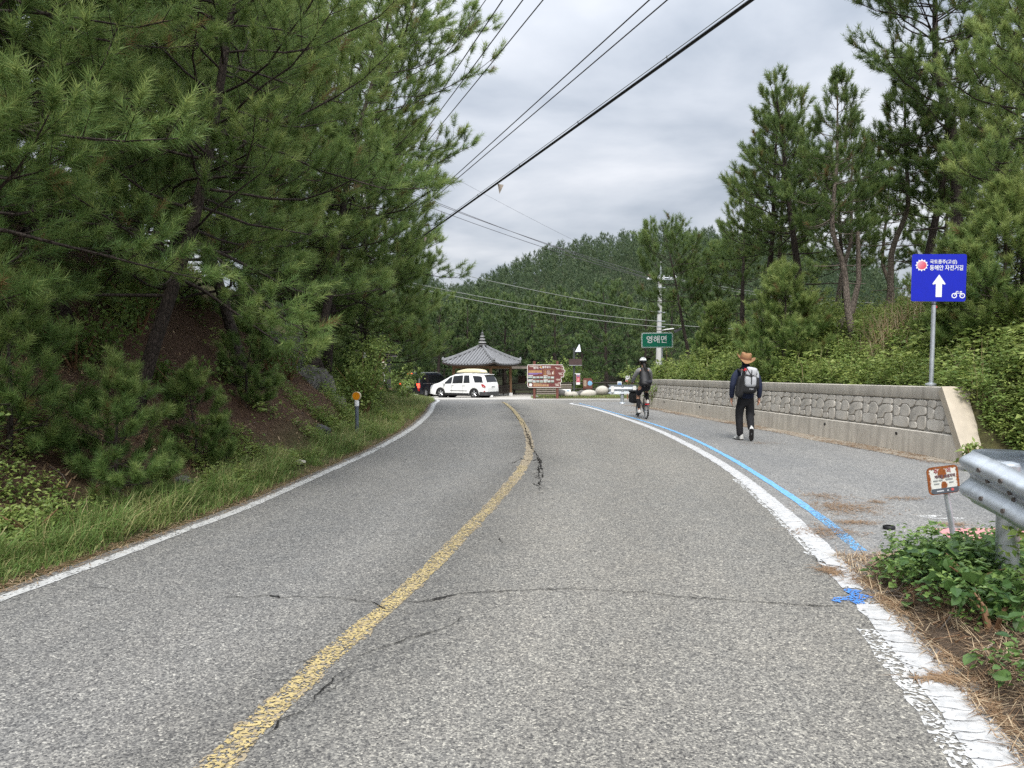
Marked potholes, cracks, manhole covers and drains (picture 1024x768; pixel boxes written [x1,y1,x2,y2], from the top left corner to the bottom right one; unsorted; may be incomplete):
crack [224,588,837,614]
crack [360,614,468,656]
